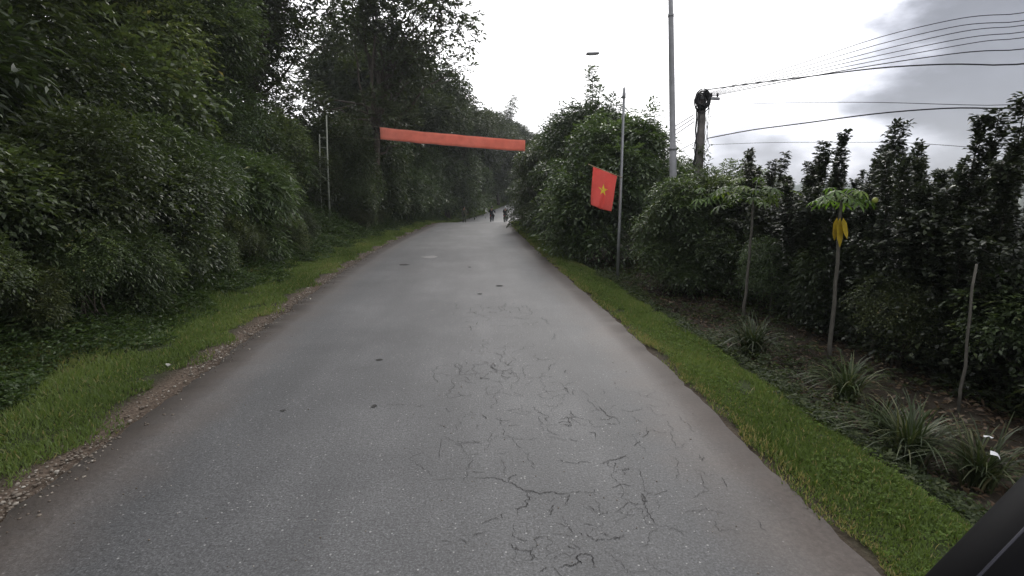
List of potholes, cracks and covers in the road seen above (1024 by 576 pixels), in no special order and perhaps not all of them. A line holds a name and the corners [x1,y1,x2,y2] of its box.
crack [410,303,768,576]
